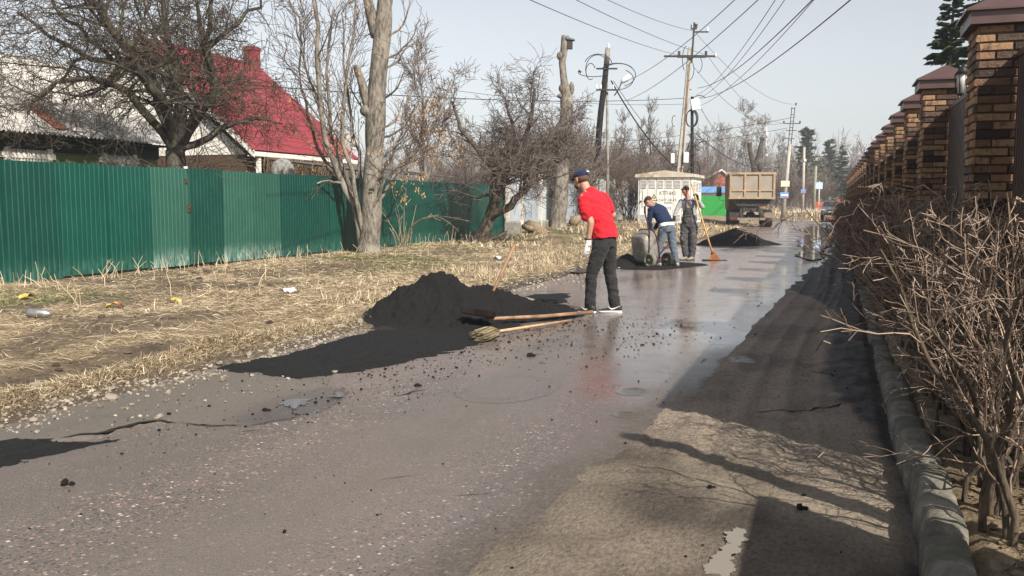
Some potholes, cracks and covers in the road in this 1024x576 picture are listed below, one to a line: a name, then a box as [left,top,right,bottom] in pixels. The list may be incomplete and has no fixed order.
pothole [182,387,346,426]
crack [60,417,298,438]
crack [760,402,841,412]
